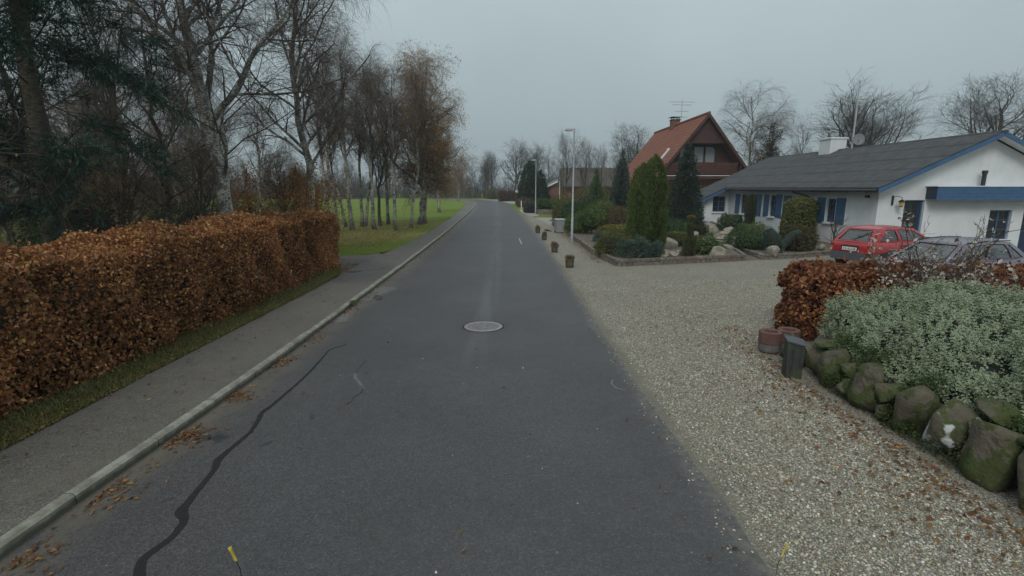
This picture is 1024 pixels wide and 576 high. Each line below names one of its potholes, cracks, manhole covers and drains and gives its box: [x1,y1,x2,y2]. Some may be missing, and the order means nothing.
manhole cover [463,321,504,332]
